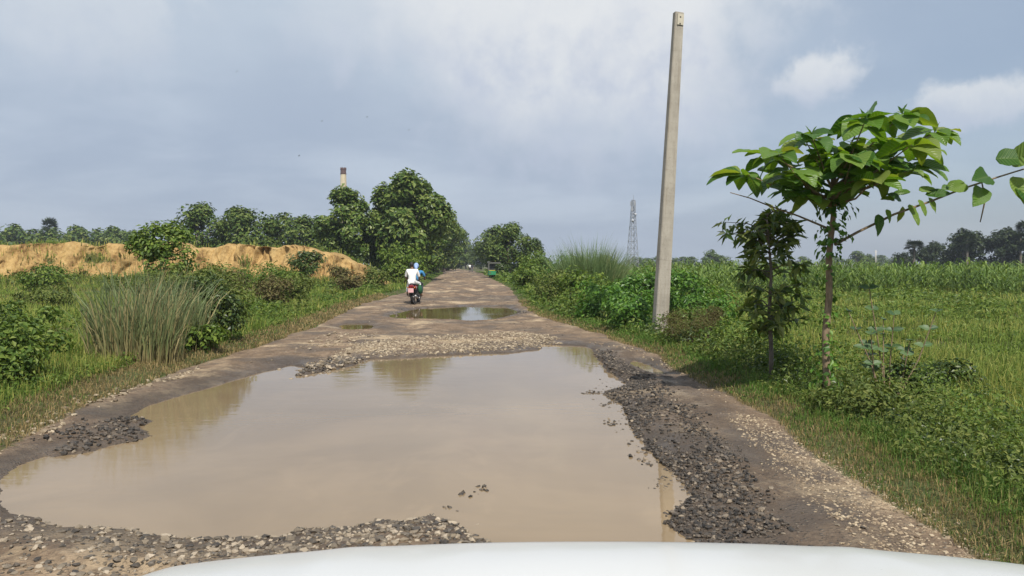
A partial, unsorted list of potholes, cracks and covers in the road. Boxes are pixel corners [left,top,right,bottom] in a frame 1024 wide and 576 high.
pothole [385,305,520,321]
pothole [334,322,378,330]
pothole [0,342,712,543]
